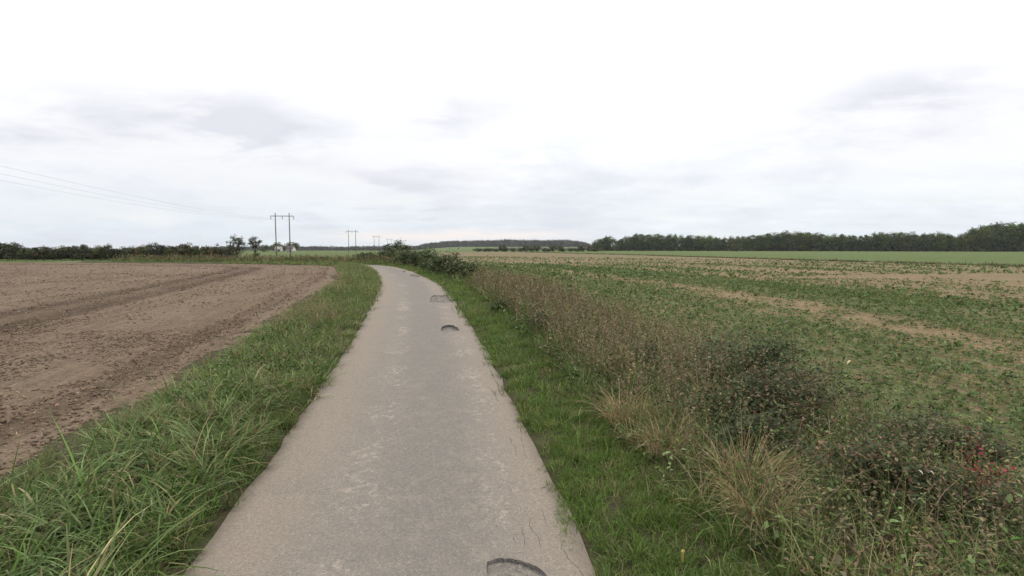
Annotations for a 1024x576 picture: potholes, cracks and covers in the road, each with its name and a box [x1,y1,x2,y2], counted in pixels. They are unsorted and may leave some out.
pothole [430,295,452,303]
crack [513,510,583,575]
pothole [486,558,547,576]
pothole [441,325,458,333]
